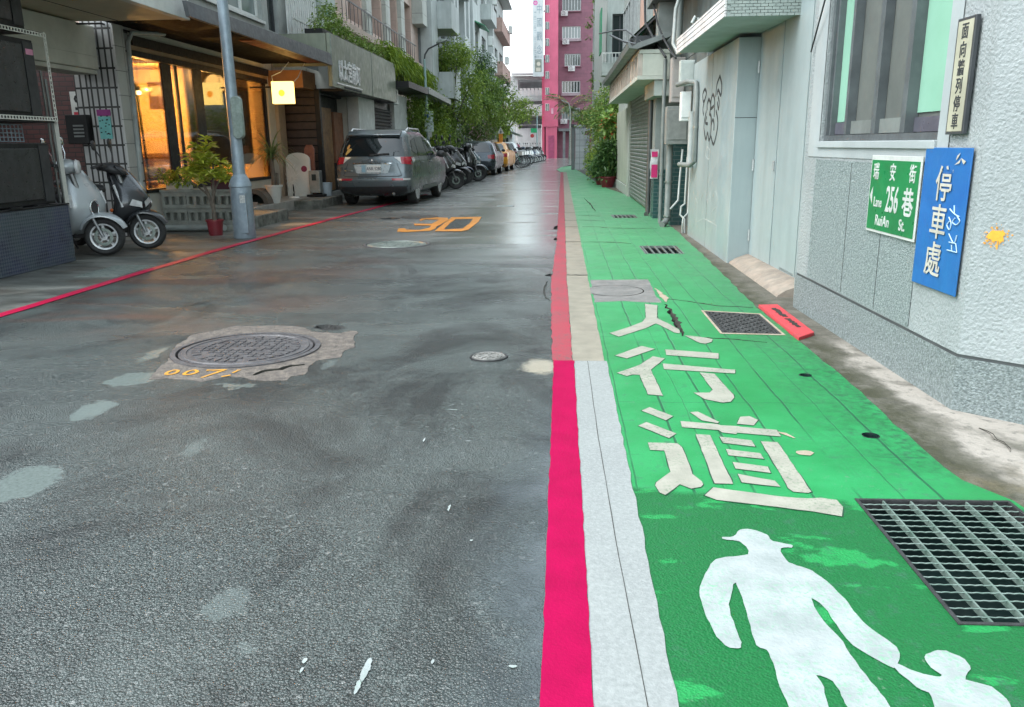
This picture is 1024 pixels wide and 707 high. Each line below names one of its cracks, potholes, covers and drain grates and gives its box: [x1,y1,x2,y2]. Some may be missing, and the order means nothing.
crack [664,299,767,343]
manhole cover [363,240,430,249]
drain grate [854,498,1024,627]
crack [253,364,305,375]
drain grate [639,246,685,254]
manhole cover [470,351,507,362]
drain grate [701,310,785,335]
crack [979,428,1011,452]
